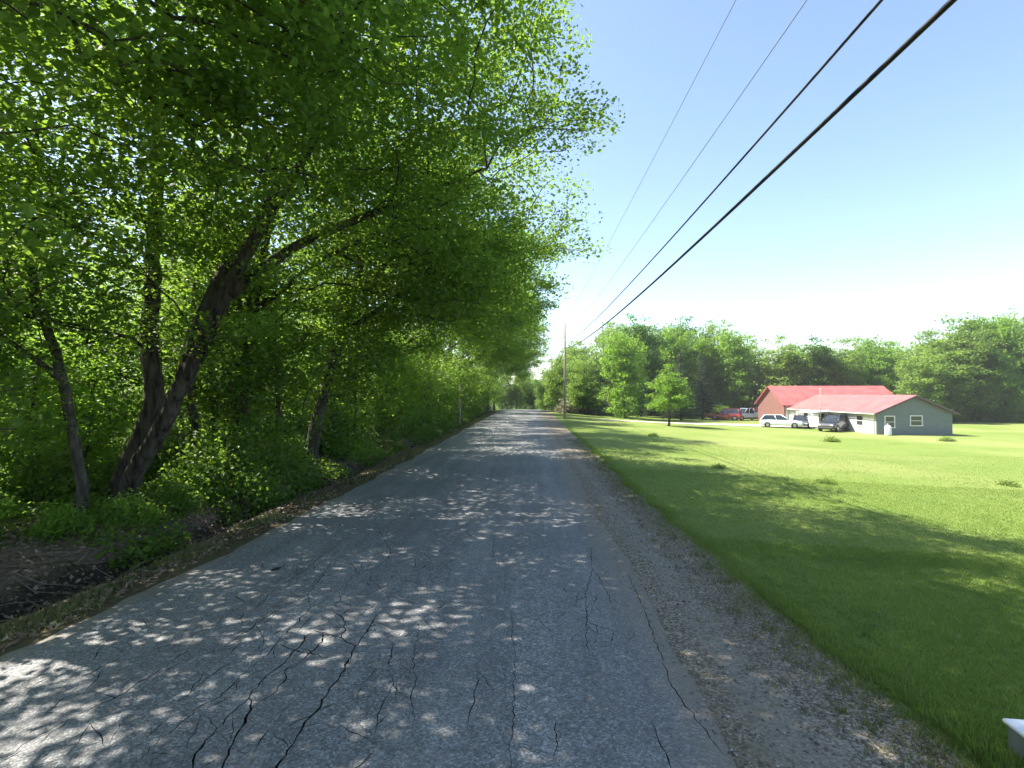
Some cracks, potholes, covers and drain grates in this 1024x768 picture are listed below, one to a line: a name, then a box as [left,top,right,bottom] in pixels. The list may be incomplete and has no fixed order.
crack [0,516,475,768]
crack [467,666,493,727]
crack [508,614,516,767]
crack [541,549,729,768]
